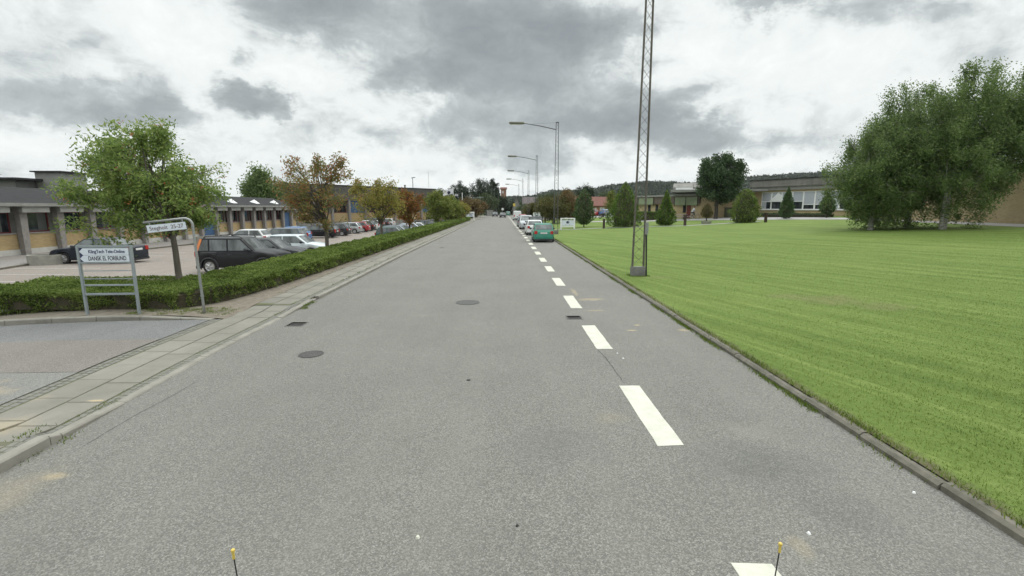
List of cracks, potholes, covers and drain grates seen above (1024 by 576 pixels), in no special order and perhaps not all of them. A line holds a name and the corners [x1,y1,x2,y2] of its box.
manhole cover [298,350,324,358]
